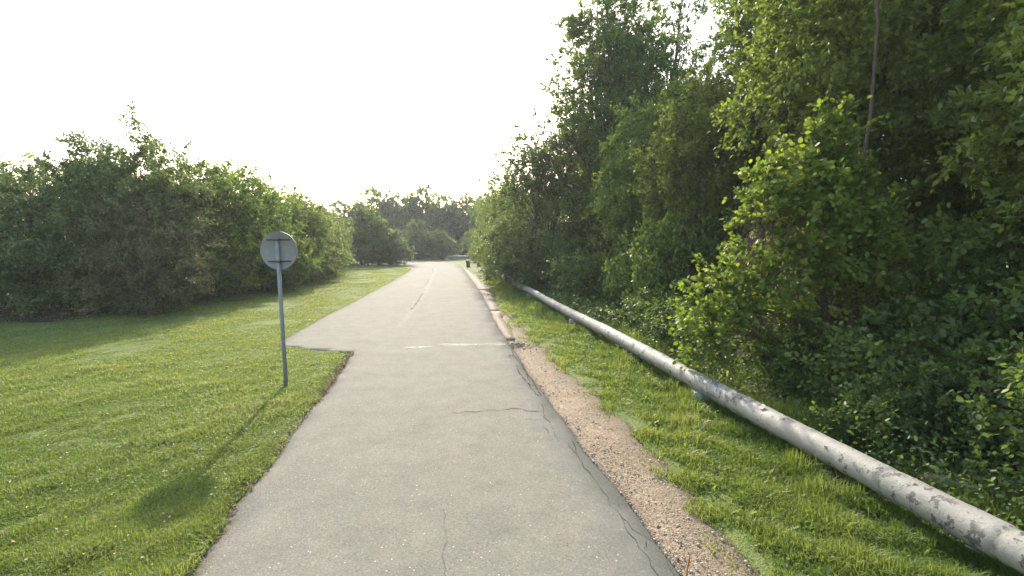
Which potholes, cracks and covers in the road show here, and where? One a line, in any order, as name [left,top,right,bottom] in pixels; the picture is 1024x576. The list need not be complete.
crack [451,340,675,576]
